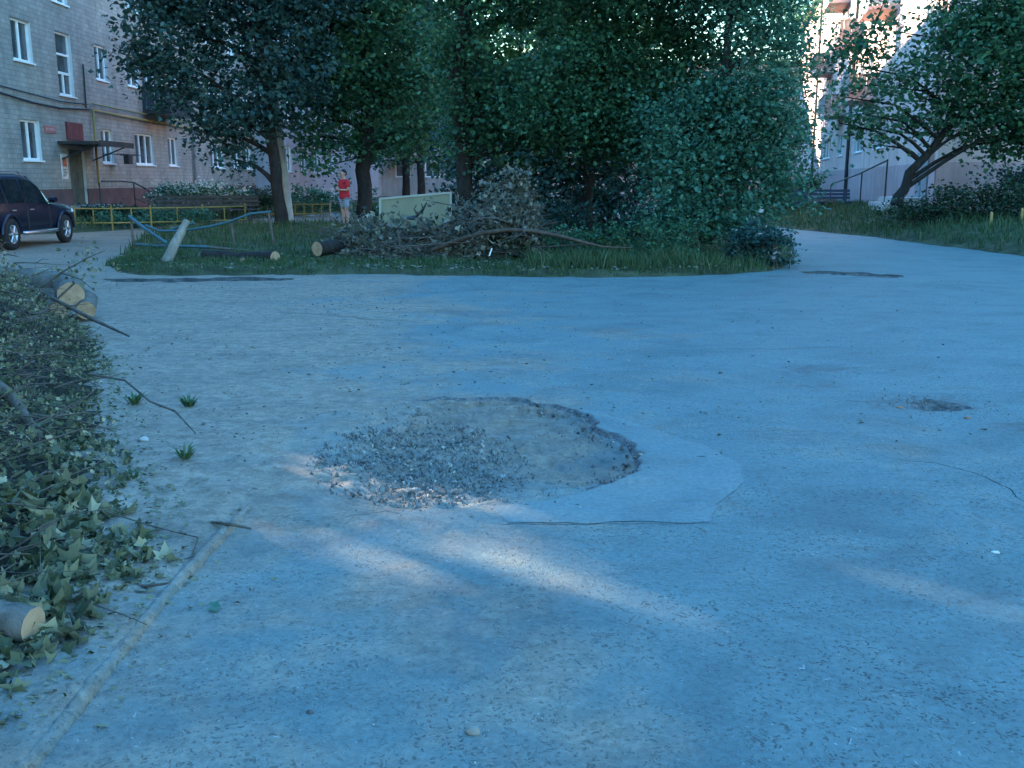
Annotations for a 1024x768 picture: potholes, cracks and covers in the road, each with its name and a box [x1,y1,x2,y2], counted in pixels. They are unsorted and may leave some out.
crack [889,458,1024,502]
pothole [910,399,974,412]
pothole [308,396,644,510]
